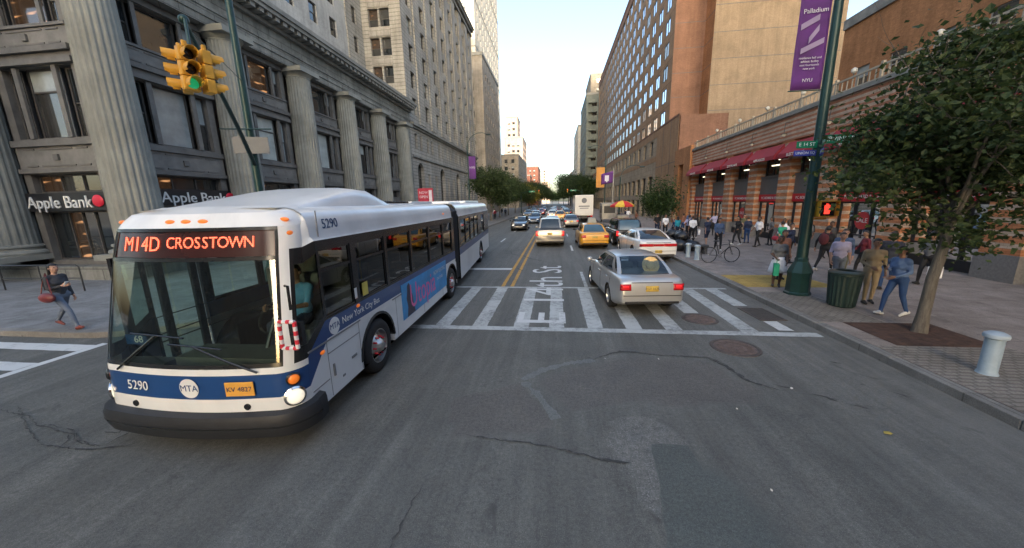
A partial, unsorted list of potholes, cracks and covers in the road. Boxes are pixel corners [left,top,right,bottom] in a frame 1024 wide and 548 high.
crack [470,435,631,464]
crack [1,407,143,450]
crack [389,487,422,548]
manhole cover [709,339,763,357]
manhole cover [681,314,719,325]
